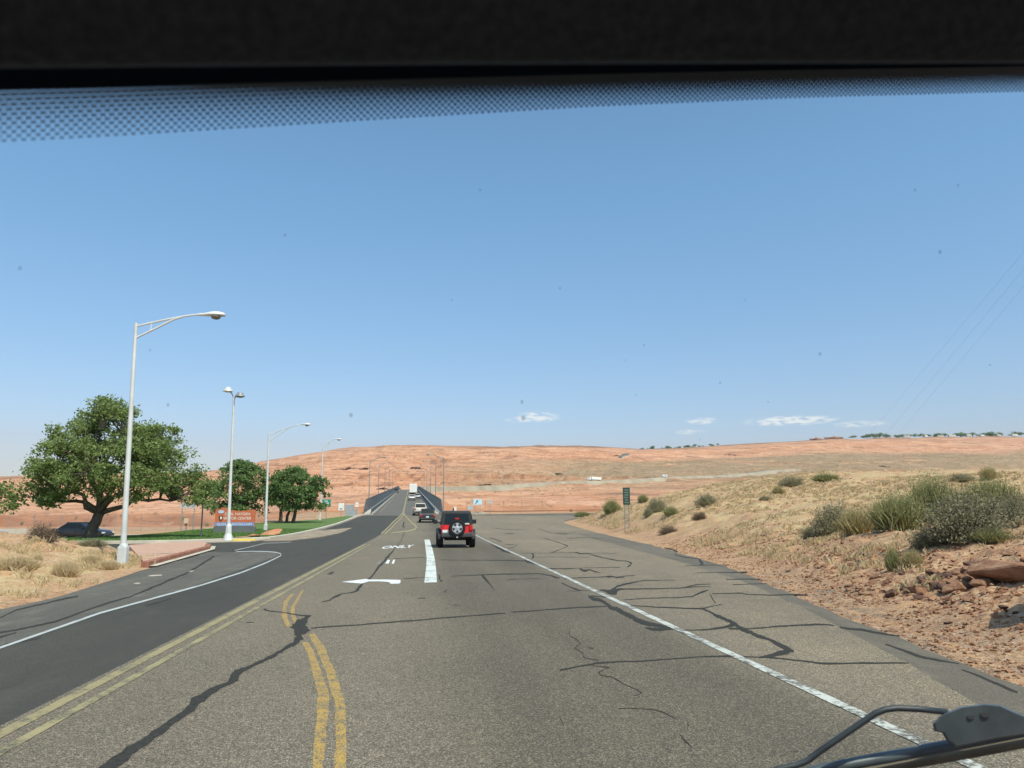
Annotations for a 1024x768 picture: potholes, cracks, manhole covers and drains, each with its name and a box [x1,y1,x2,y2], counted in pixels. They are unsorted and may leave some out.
crack [560,628,1018,747]
crack [311,528,635,629]
crack [624,548,808,603]
